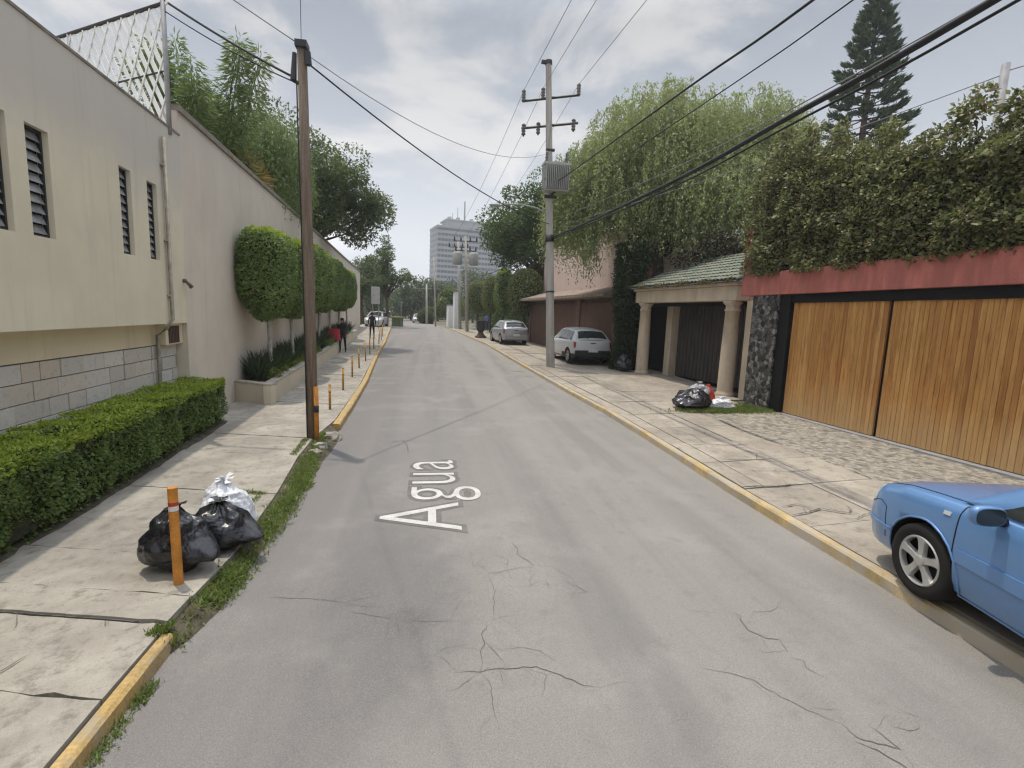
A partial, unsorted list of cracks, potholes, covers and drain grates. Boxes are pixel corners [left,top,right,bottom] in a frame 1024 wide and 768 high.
crack [273,588,468,644]
crack [683,600,816,670]
crack [436,543,639,729]
crack [703,666,935,768]
